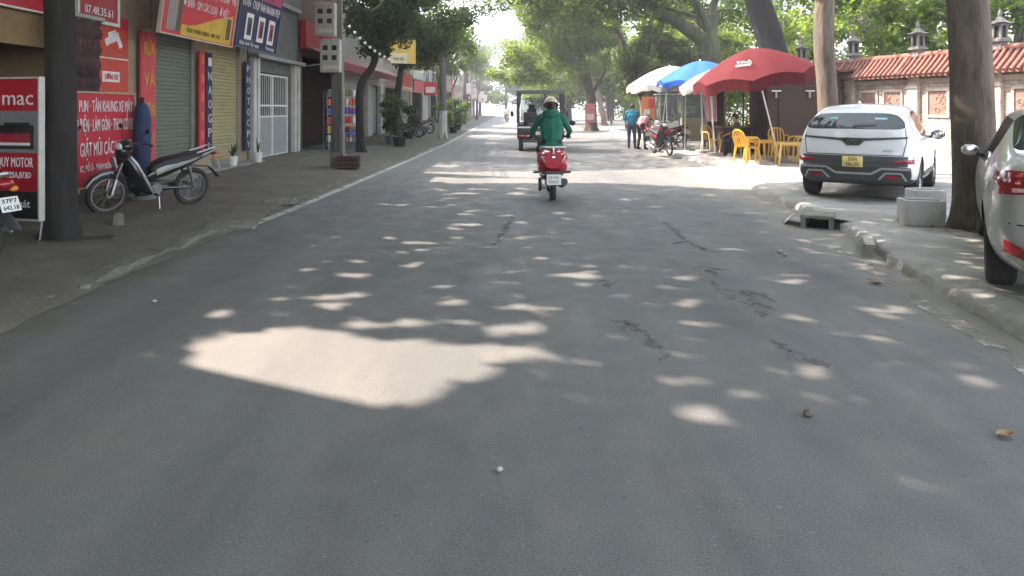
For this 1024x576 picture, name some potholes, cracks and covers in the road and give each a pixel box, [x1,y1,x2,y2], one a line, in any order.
drain grate [782,210,863,230]
crack [664,222,775,315]
crack [770,340,831,367]
crack [612,321,668,355]
